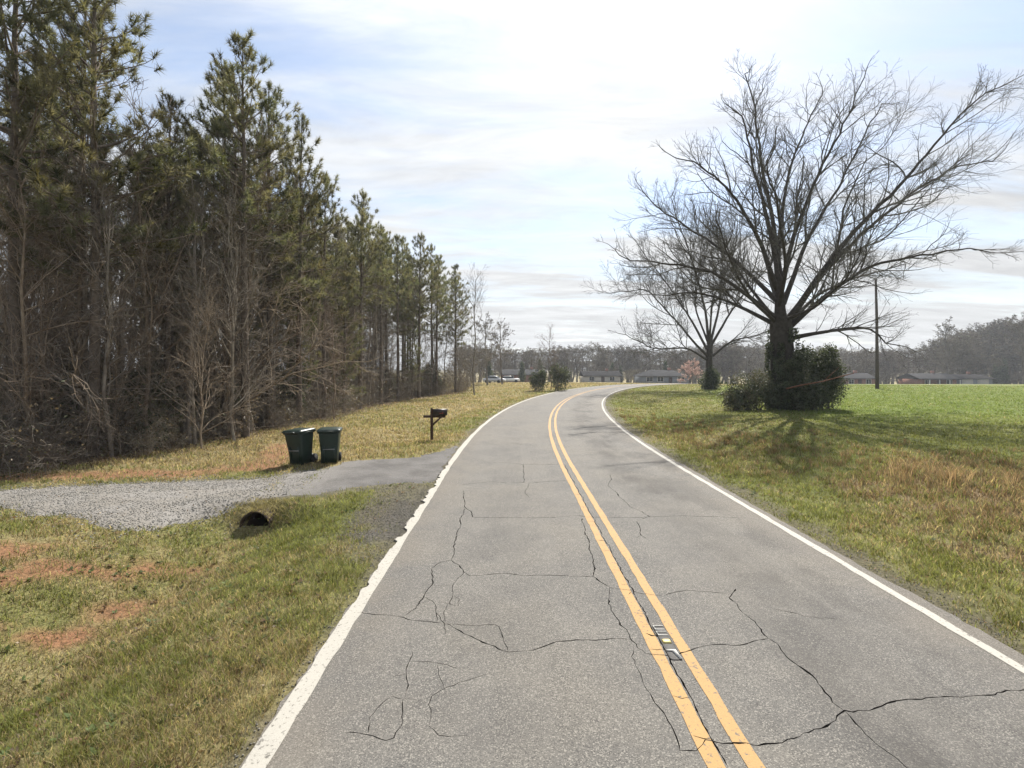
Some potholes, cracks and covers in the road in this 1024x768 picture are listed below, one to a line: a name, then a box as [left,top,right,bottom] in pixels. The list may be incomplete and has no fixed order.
crack [365,464,1024,768]
